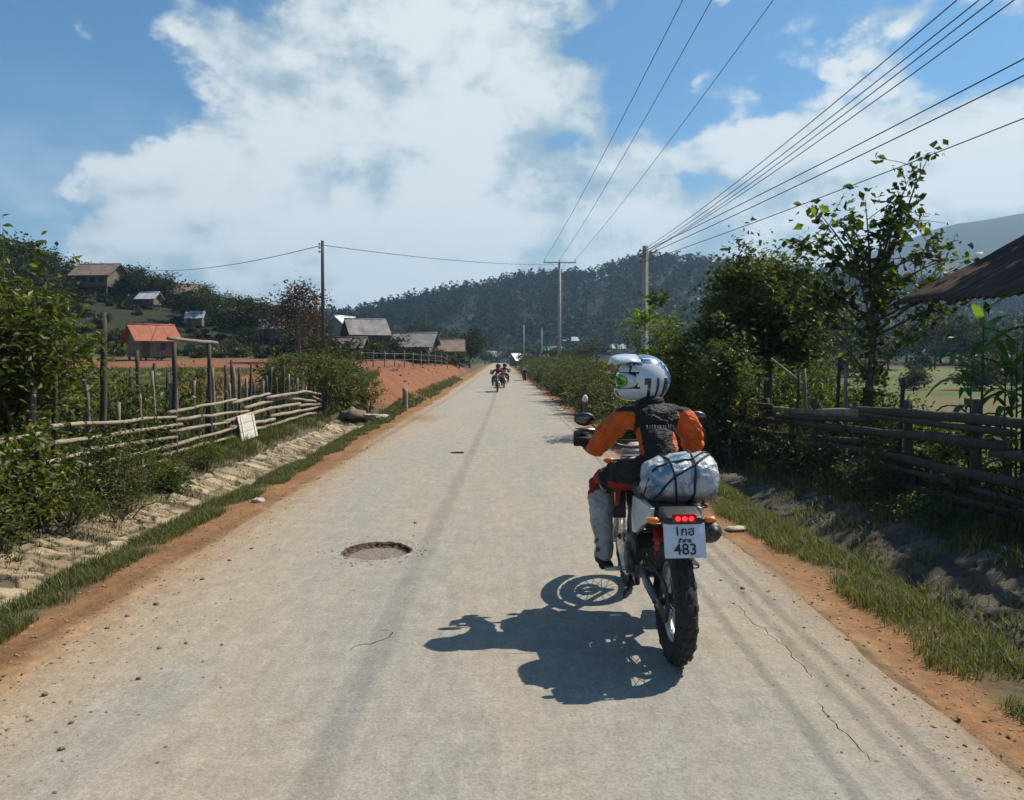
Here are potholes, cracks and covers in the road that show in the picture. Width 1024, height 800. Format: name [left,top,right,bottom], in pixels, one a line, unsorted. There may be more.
pothole [341,541,413,560]
crack [729,601,870,760]
